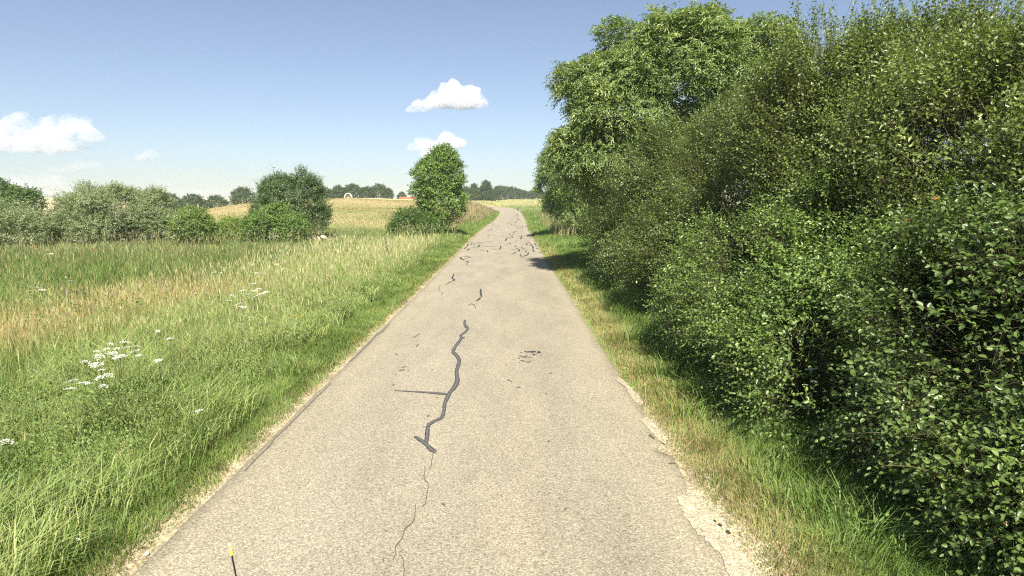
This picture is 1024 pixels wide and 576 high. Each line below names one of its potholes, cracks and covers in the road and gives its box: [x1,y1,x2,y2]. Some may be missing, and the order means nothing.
crack [464,208,526,265]
crack [393,453,434,575]
